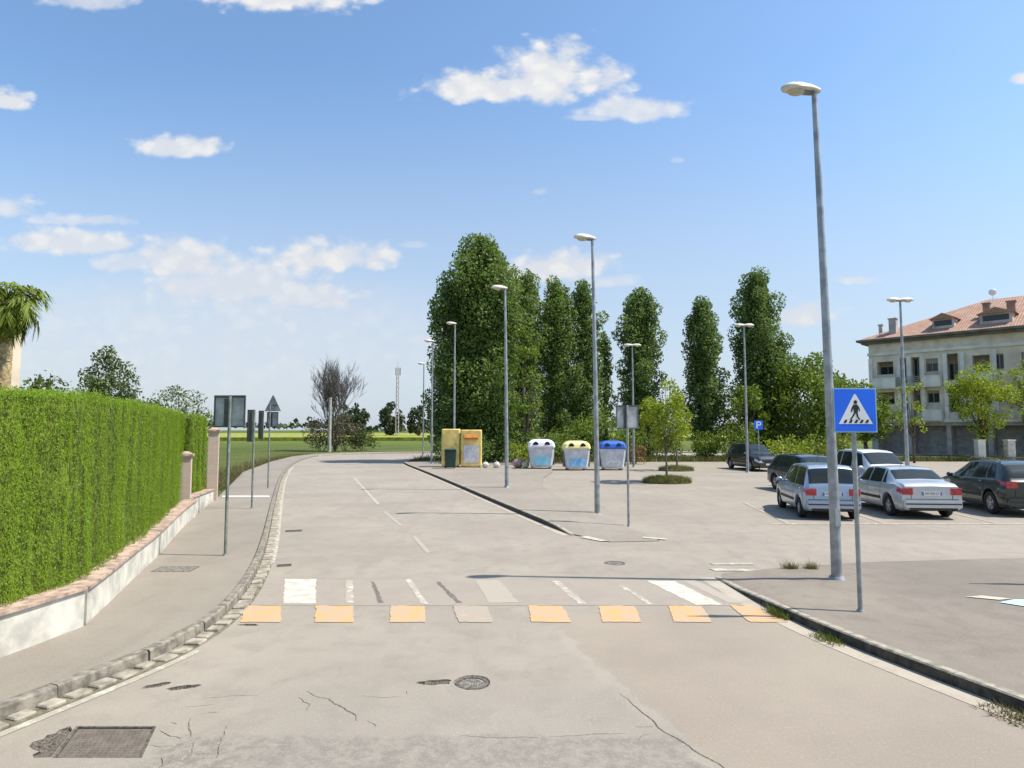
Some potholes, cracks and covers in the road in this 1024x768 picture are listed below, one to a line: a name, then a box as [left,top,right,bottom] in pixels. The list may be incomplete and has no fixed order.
crack [461,695,724,768]
crack [152,695,247,768]
crack [298,691,407,728]
manhole cover [453,675,490,690]
manhole cover [52,726,156,758]
